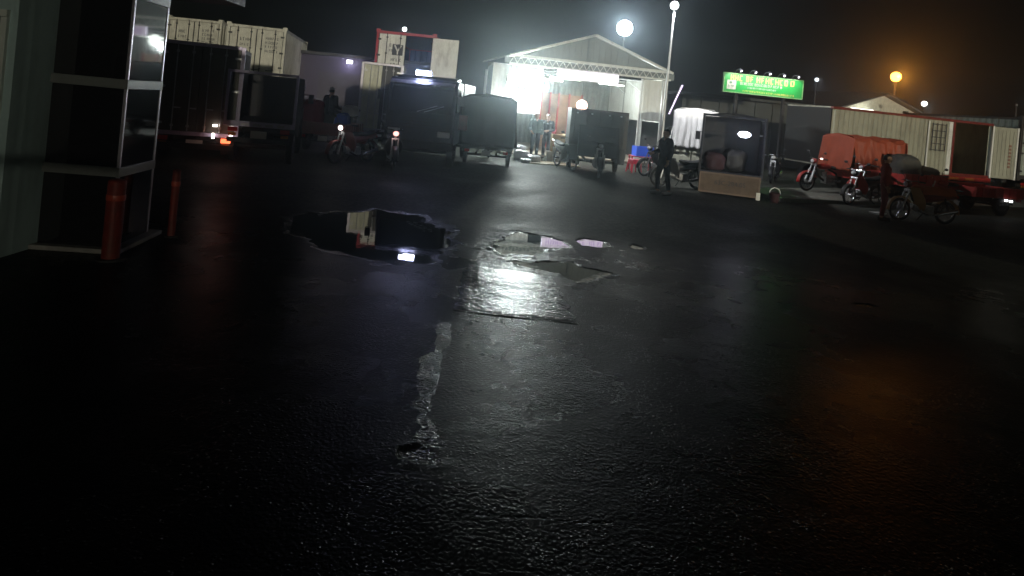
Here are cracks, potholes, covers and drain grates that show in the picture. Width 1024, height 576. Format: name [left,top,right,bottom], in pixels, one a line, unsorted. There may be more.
pothole [279,208,464,266]
pothole [395,442,441,465]
pothole [490,230,572,256]
pothole [511,260,621,283]
